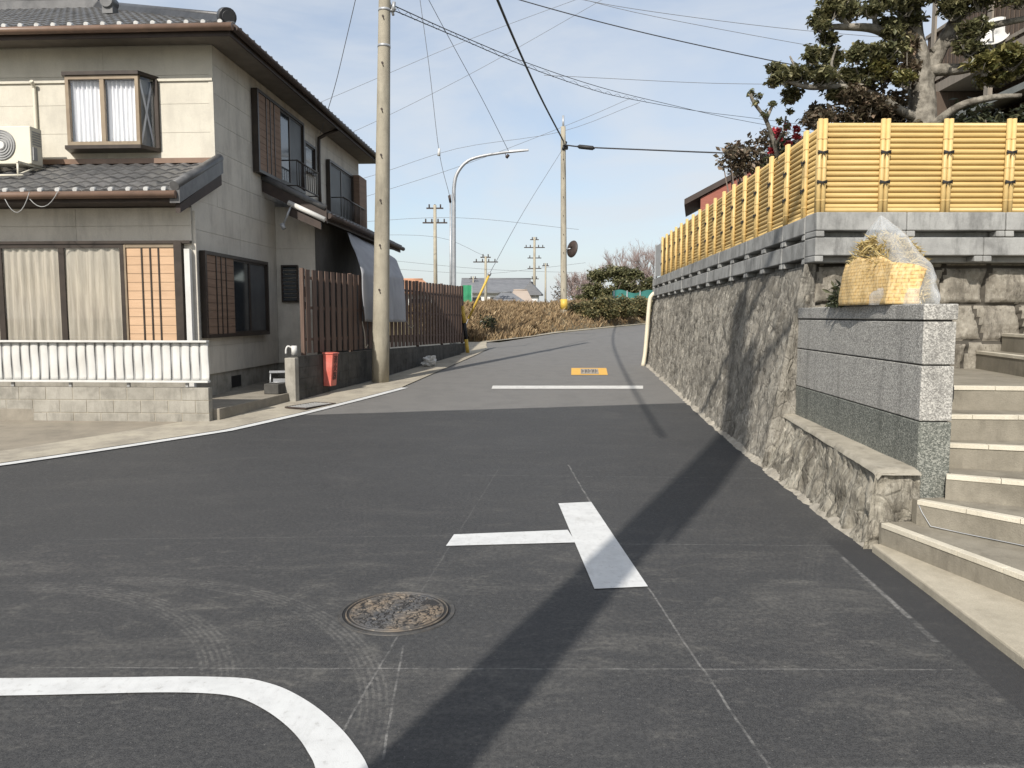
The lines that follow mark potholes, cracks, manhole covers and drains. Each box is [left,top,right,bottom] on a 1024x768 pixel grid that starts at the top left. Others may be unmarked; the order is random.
manhole cover [338,591,455,636]
